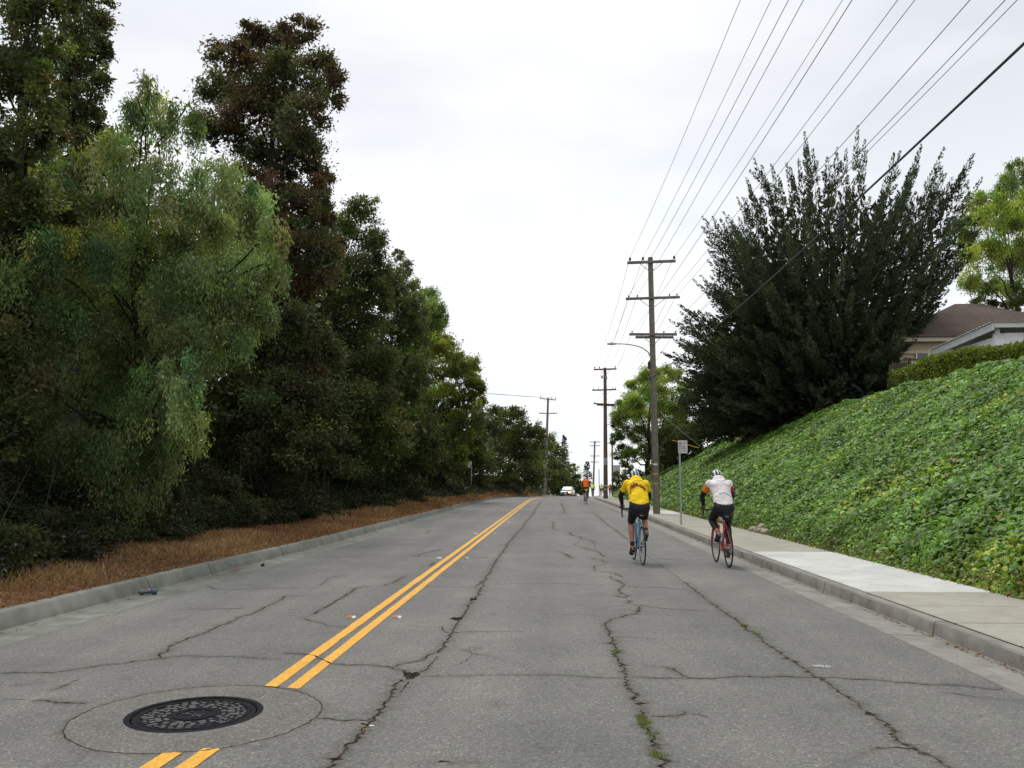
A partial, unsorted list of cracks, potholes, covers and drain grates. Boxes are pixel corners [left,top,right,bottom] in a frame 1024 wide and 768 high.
manhole cover [123,696,264,733]
crack [4,502,999,768]
